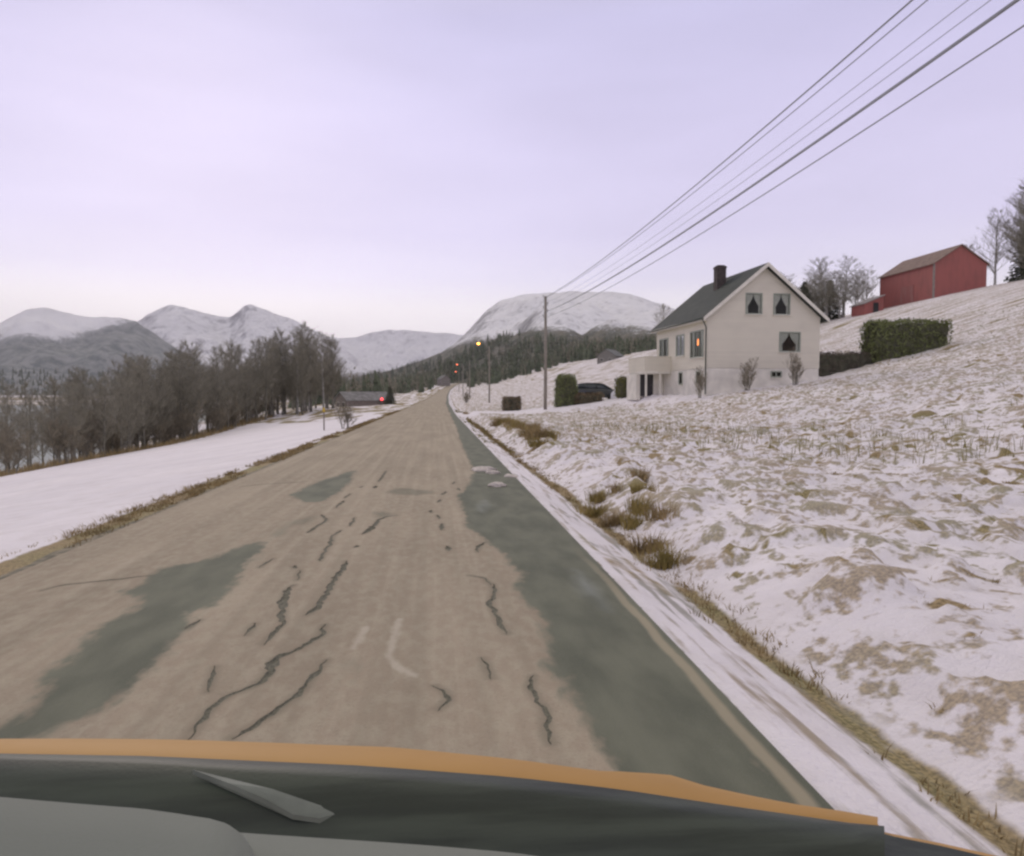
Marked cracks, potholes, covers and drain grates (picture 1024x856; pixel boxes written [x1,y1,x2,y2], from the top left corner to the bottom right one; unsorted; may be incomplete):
crack [527,675,552,744]
crack [470,575,507,634]
crack [41,575,150,591]
crack [185,472,396,740]
crack [433,686,452,711]
